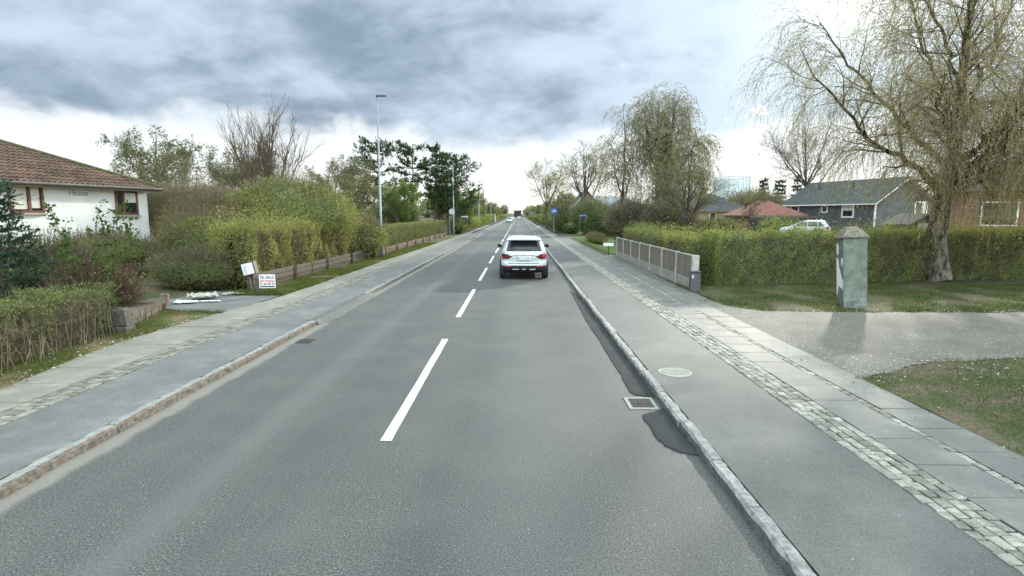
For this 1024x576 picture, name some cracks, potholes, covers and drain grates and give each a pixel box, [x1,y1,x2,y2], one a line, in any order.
manhole cover [658,368,692,377]
